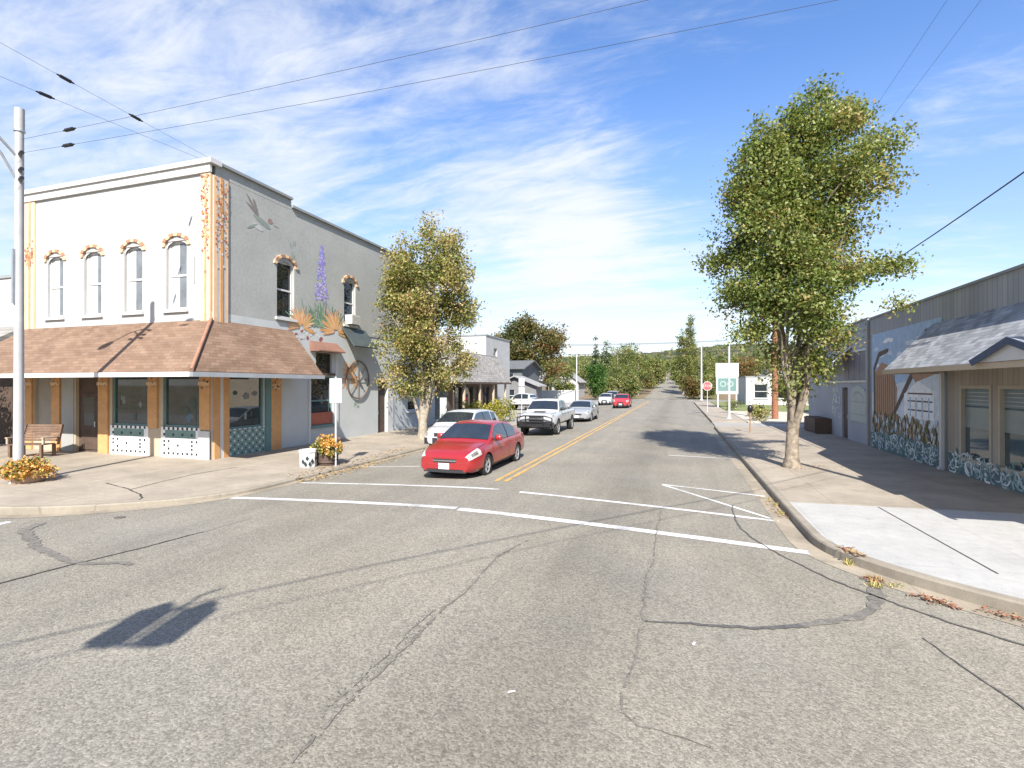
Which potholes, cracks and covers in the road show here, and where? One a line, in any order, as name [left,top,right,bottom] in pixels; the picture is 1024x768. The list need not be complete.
crack [732,505,1024,709]
crack [620,510,714,749]
crack [0,518,250,583]
crack [107,467,236,500]
